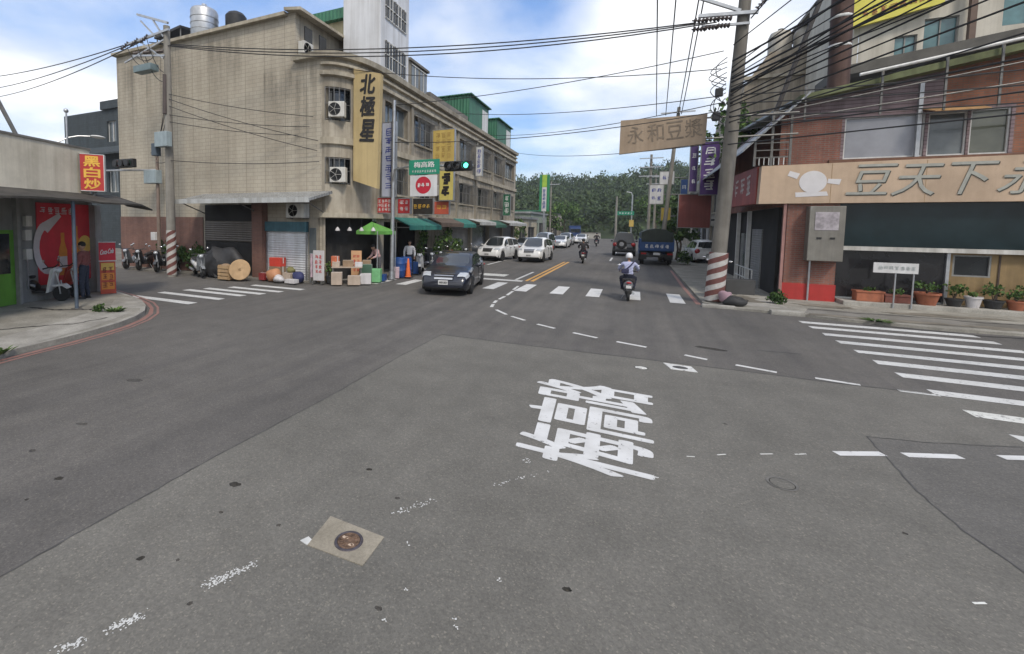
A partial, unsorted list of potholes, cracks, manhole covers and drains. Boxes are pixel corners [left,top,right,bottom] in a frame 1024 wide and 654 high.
utility cover [766,476,799,491]
manhole cover [300,516,384,566]
